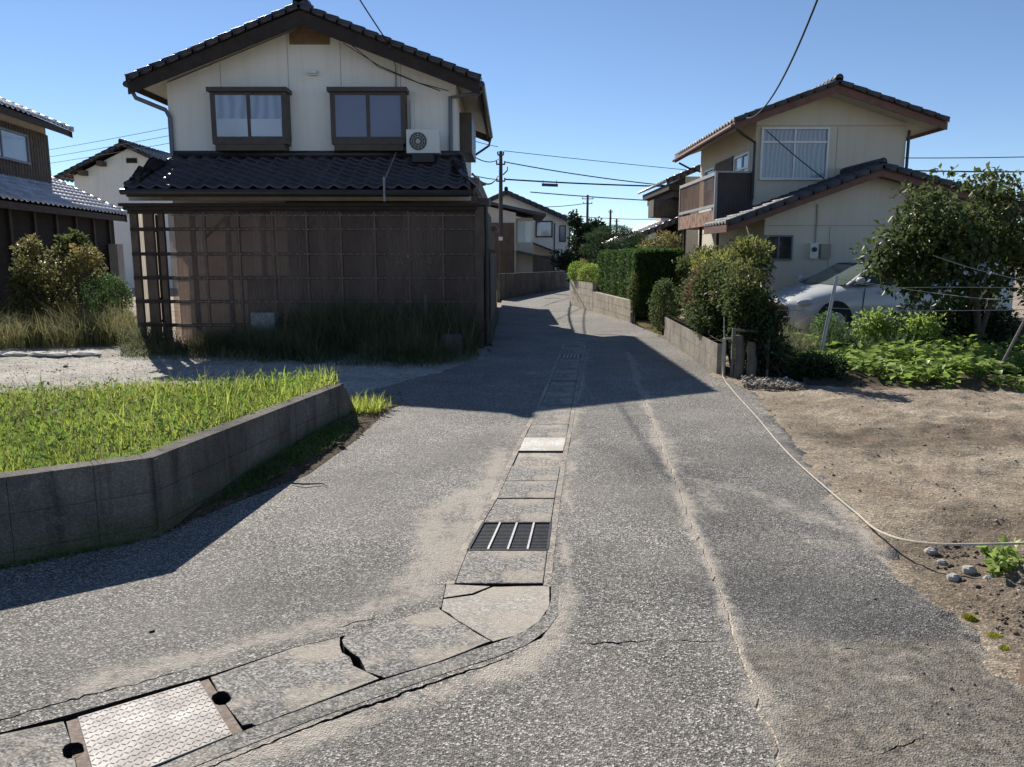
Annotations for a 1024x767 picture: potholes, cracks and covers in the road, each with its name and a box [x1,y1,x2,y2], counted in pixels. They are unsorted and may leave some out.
crack [583,353,781,767]
crack [0,656,511,767]
crack [878,735,924,755]
drain grate [467,522,552,552]
